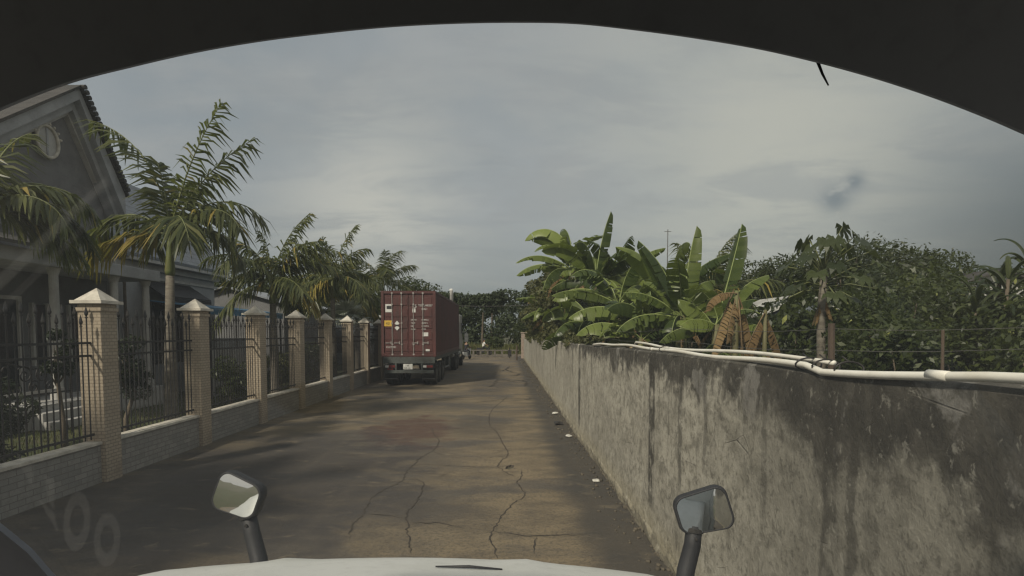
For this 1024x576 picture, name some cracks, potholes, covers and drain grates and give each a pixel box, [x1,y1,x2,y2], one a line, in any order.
crack [348,366,587,558]
